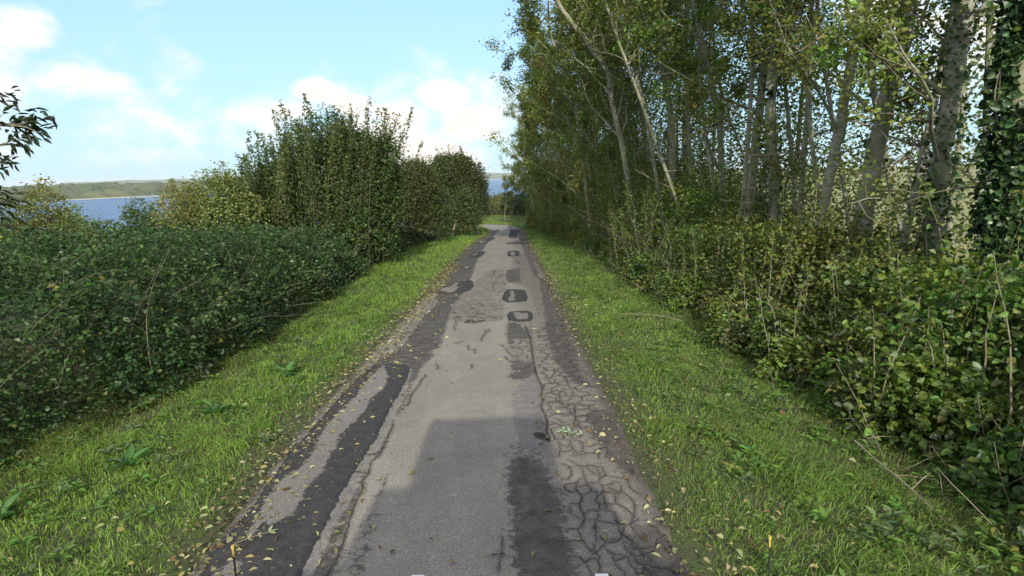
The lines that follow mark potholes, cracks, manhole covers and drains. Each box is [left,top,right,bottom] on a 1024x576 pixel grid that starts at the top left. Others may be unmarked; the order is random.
crack [504,322,684,576]
